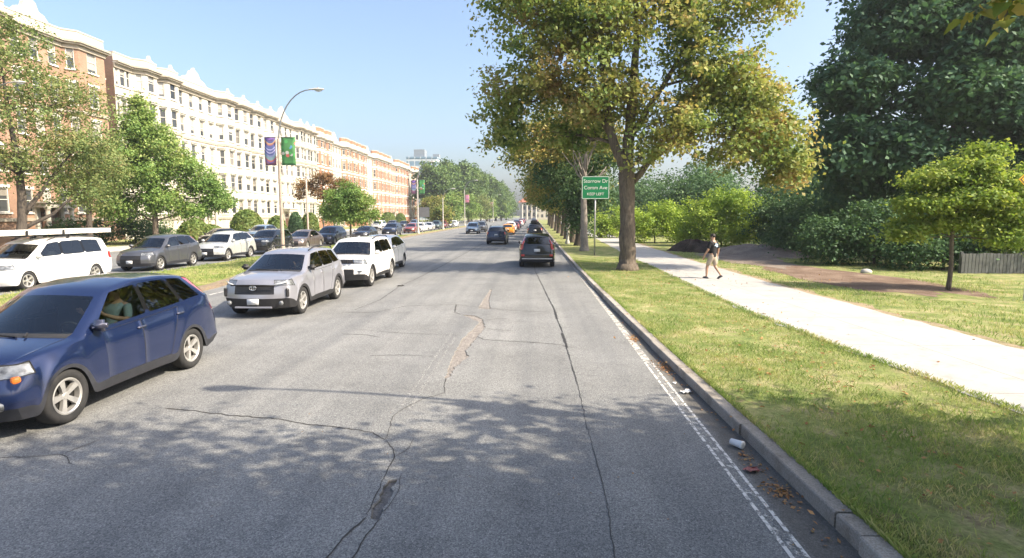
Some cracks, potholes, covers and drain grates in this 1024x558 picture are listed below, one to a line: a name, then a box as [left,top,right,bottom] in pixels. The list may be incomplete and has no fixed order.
pothole [370,479,398,521]
crack [355,241,615,558]
crack [166,379,446,558]
